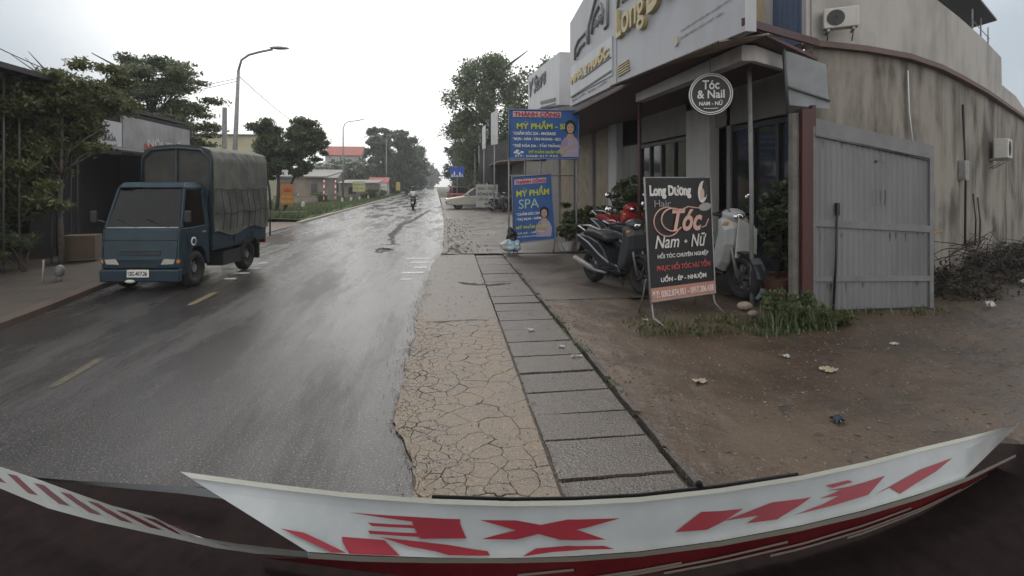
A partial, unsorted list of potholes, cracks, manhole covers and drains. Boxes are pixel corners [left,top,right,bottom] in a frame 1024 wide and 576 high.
crack [386,211,429,245]
crack [395,319,566,501]
